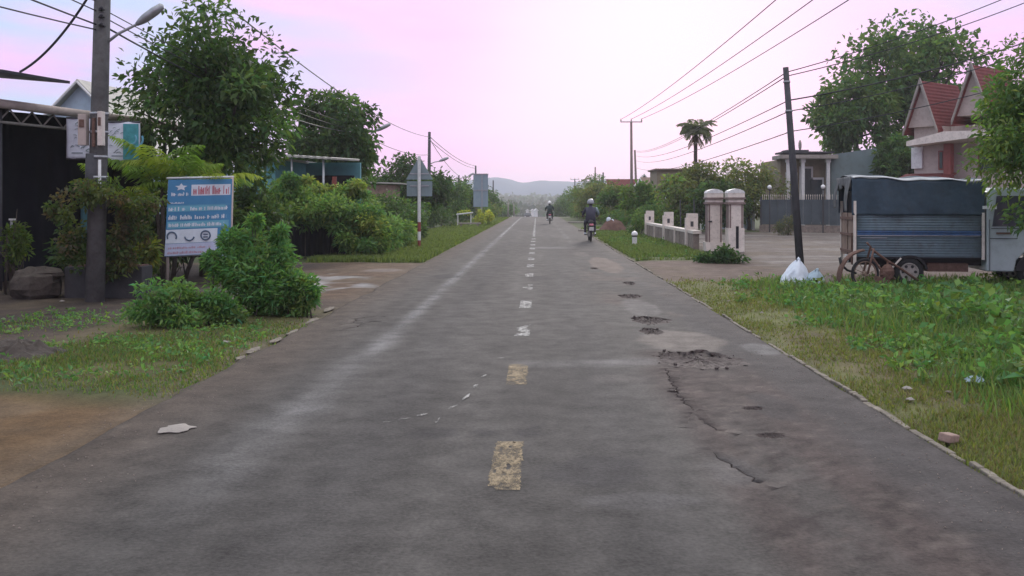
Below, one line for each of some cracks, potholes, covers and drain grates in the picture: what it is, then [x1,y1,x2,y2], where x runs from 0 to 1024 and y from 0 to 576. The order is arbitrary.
pothole [632,327,670,336]
pothole [625,315,678,326]
pothole [743,430,799,442]
pothole [731,405,774,413]
pothole [648,348,754,371]
crack [656,367,786,492]
